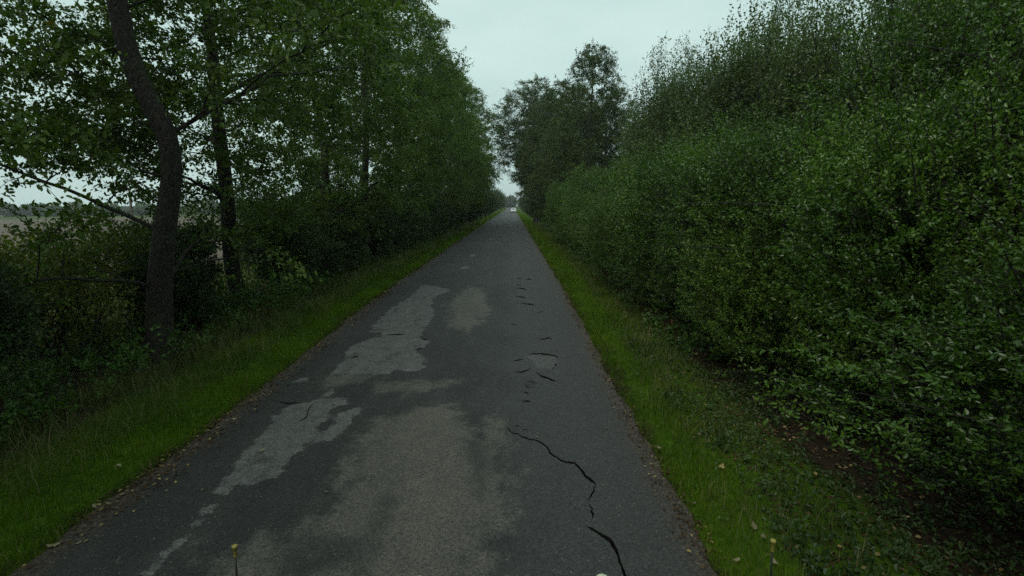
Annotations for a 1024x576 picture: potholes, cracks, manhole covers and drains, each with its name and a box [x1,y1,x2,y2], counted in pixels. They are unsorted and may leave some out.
crack [514,337,559,402]
crack [507,425,627,576]
